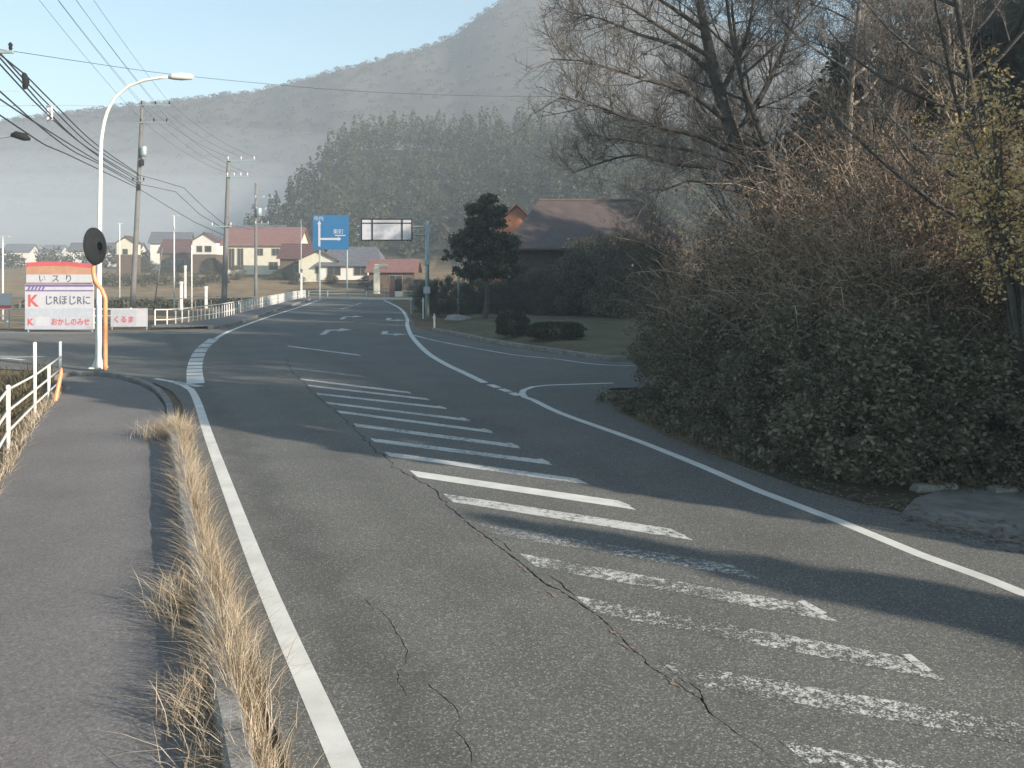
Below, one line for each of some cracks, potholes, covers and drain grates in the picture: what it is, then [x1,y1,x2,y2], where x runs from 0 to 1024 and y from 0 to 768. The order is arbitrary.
crack [285,358,788,767]
